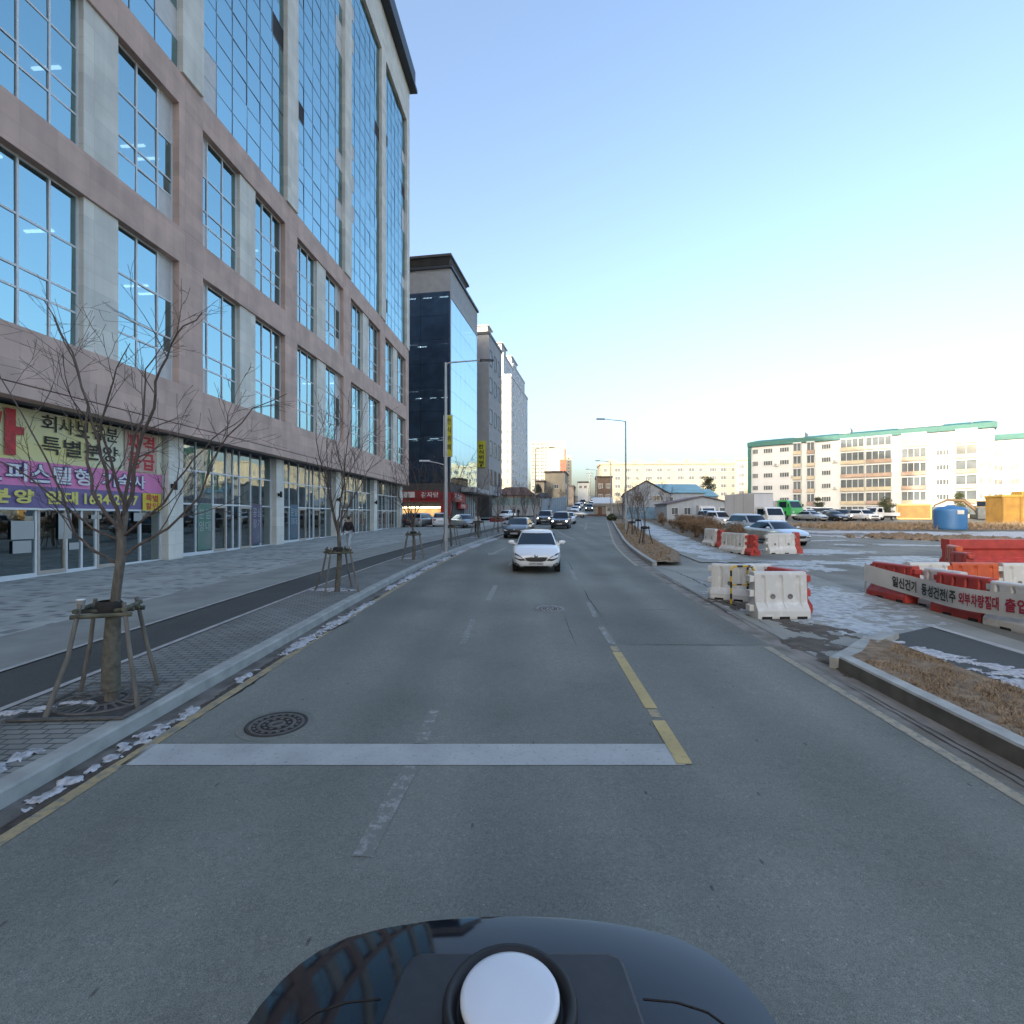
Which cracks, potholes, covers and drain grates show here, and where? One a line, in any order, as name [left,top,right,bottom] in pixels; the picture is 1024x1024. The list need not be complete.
manhole cover [532,605,567,613]
manhole cover [235,710,315,741]
